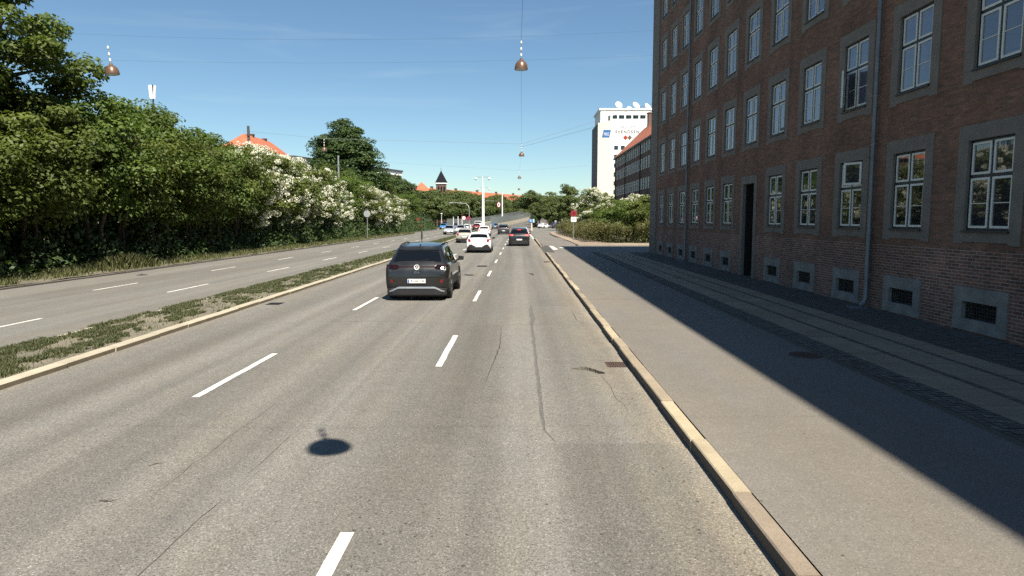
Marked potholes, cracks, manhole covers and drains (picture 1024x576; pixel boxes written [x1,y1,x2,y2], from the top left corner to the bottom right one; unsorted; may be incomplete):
crack [138,499,223,576]
